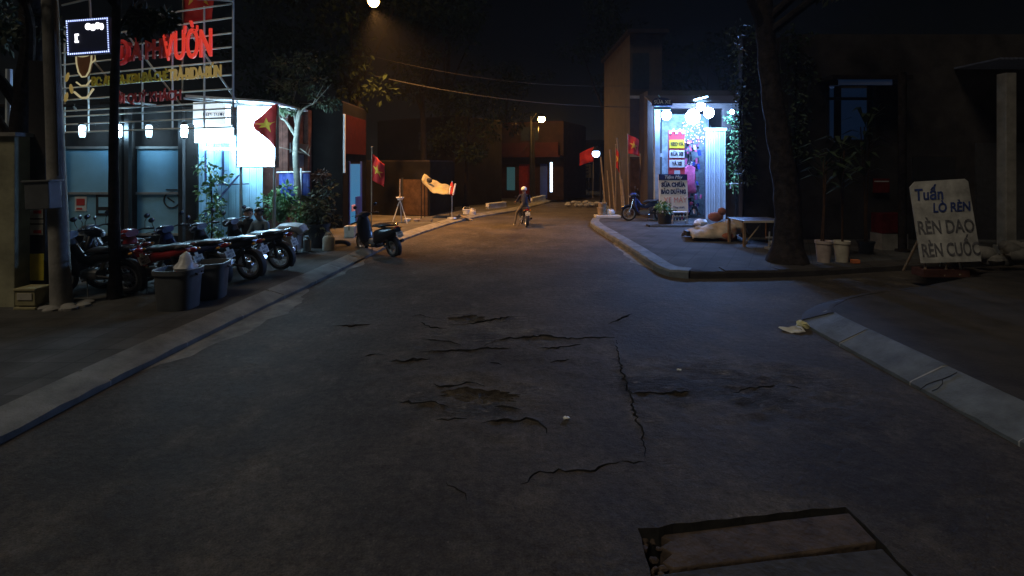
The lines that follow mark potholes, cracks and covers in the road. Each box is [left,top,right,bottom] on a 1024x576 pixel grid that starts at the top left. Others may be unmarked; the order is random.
manhole cover [638,507,913,576]
pothole [447,315,485,323]
crack [522,461,643,484]
pothole [440,387,521,405]
crack [366,314,615,433]
